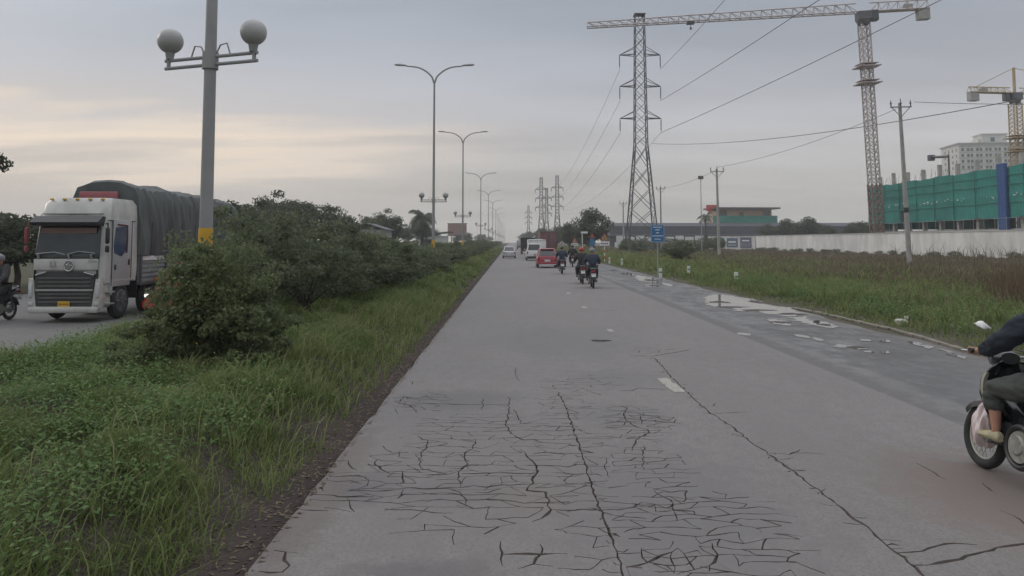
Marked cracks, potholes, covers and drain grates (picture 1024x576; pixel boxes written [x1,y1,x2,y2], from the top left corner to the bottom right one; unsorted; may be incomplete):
crack [308,347,1024,576]
